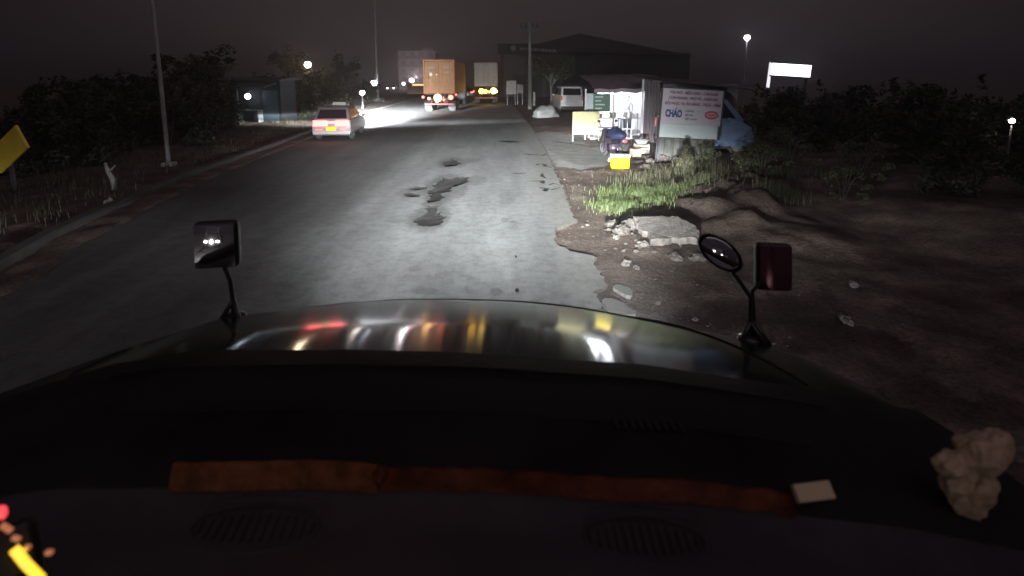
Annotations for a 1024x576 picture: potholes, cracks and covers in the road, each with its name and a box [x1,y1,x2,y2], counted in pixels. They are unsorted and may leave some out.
pothole [441,158,462,167]
pothole [413,206,446,227]
pothole [427,176,470,203]
